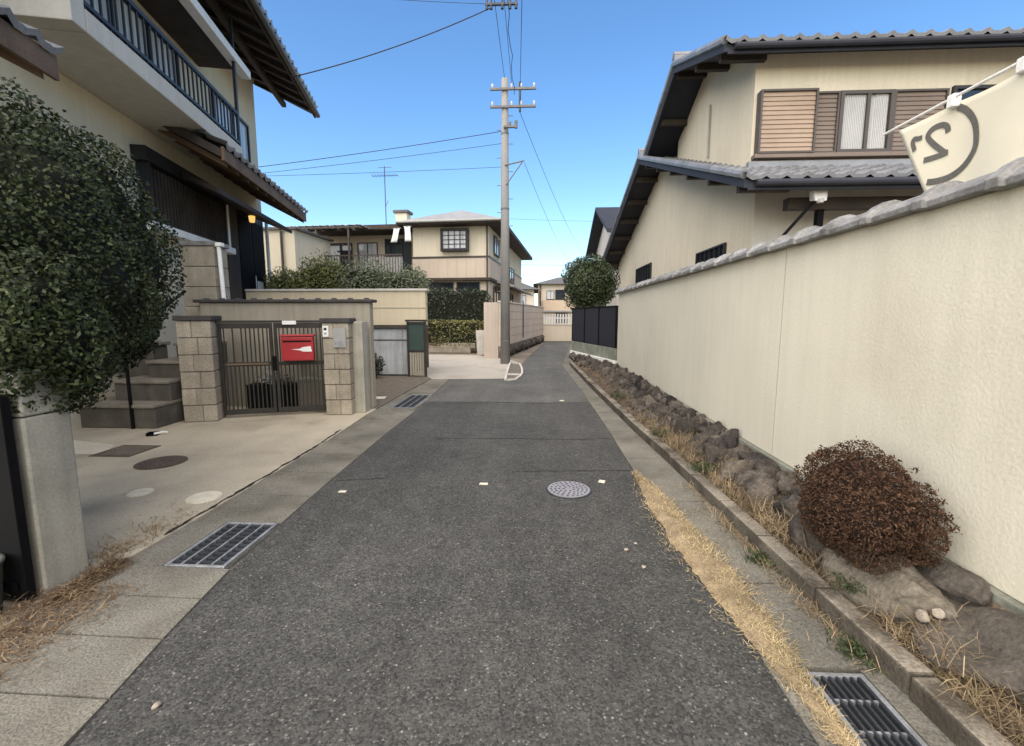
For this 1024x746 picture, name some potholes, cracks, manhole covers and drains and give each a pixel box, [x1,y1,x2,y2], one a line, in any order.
manhole cover [133,455,188,470]
drain grate [805,671,928,746]
utility cover [185,491,223,504]
drain grate [391,394,432,408]
utility cover [88,445,162,457]
drain grate [164,521,279,569]
utility cover [126,488,155,498]
manhole cover [546,481,592,499]
